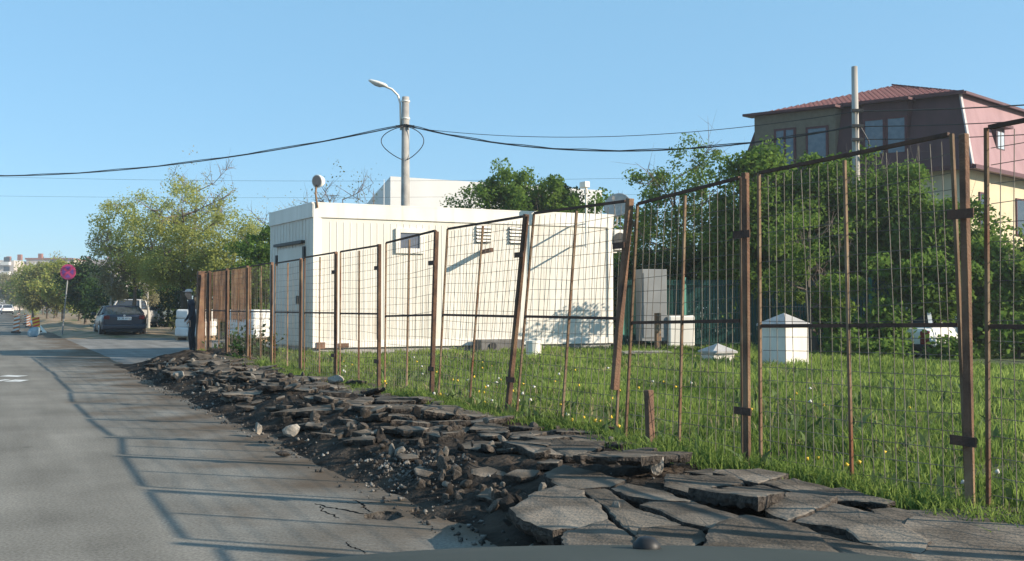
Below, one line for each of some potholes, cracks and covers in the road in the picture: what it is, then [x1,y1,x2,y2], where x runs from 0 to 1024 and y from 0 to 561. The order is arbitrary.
pothole [364,511,405,521]
crack [315,500,402,518]
